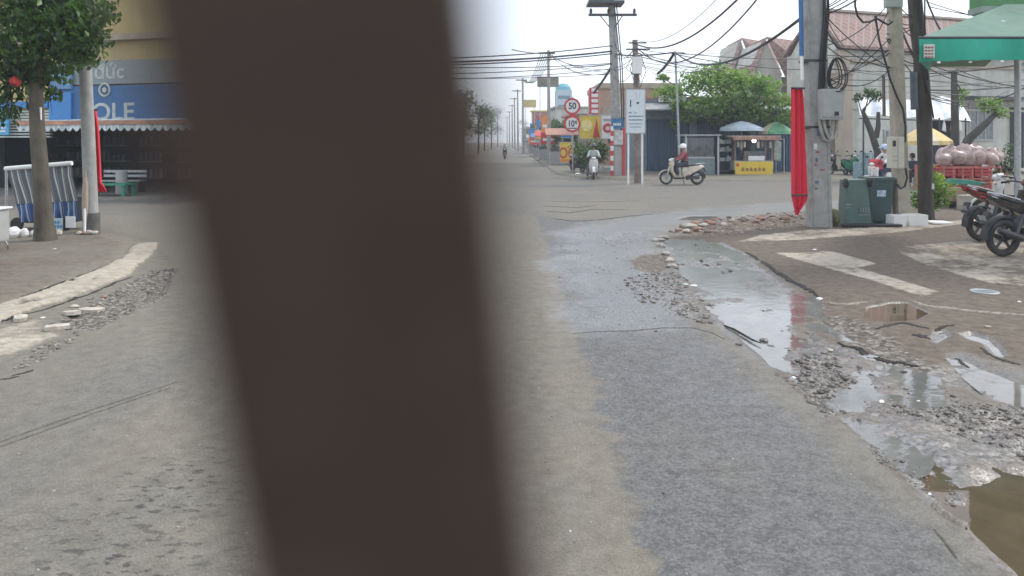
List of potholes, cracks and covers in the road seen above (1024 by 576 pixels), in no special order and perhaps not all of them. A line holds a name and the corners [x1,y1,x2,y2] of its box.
pothole [839,366,890,409]
crack [837,299,1024,373]
crack [549,201,652,221]
pothole [851,418,972,520]
pothole [927,328,956,344]
pothole [863,300,933,322]
pothole [944,351,1024,410]
pothole [956,330,1013,358]
pothole [955,460,1024,576]
crack [0,369,178,447]
pothole [43,268,177,331]
crack [573,327,724,339]
